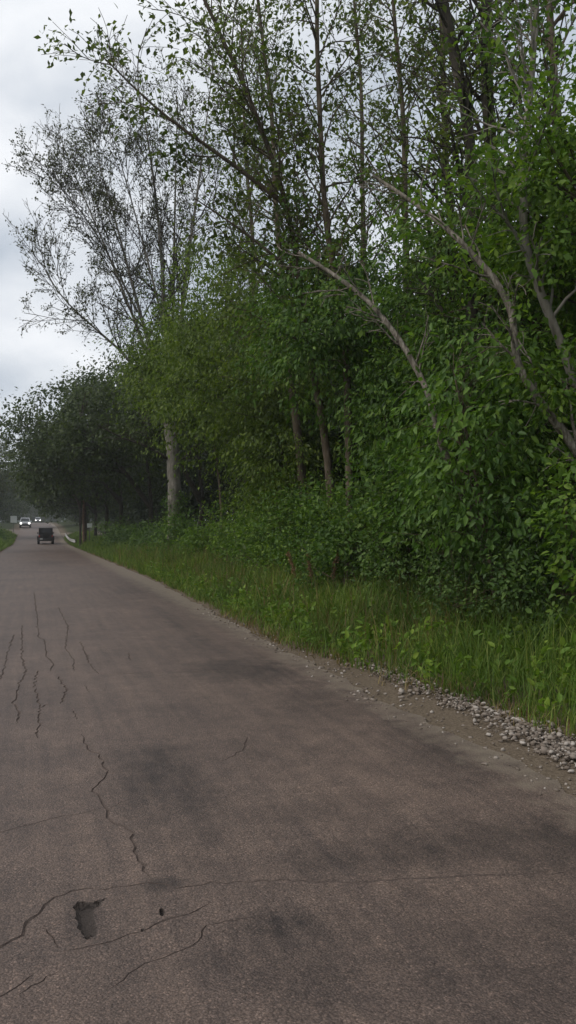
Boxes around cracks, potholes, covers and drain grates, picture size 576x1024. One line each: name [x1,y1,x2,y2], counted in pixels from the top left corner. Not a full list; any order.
crack [0,970,60,997]
pothole [72,898,106,940]
crack [0,593,576,991]
